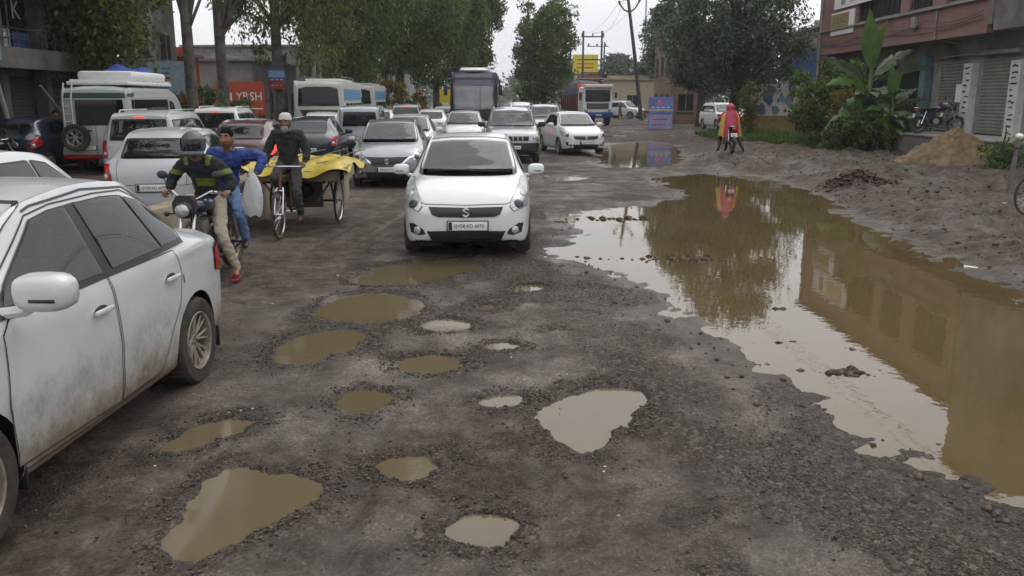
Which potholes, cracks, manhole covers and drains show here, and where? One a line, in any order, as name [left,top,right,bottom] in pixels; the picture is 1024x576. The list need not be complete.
pothole [298,289,436,326]
pothole [381,350,479,377]
pothole [342,257,495,287]
pothole [517,379,660,461]
pothole [262,323,380,370]
pothole [504,280,558,294]
pothole [407,314,483,335]
pothole [469,338,533,353]
pothole [137,457,343,576]
pothole [422,502,543,557]
pothole [357,447,457,488]
pothole [464,387,538,412]
